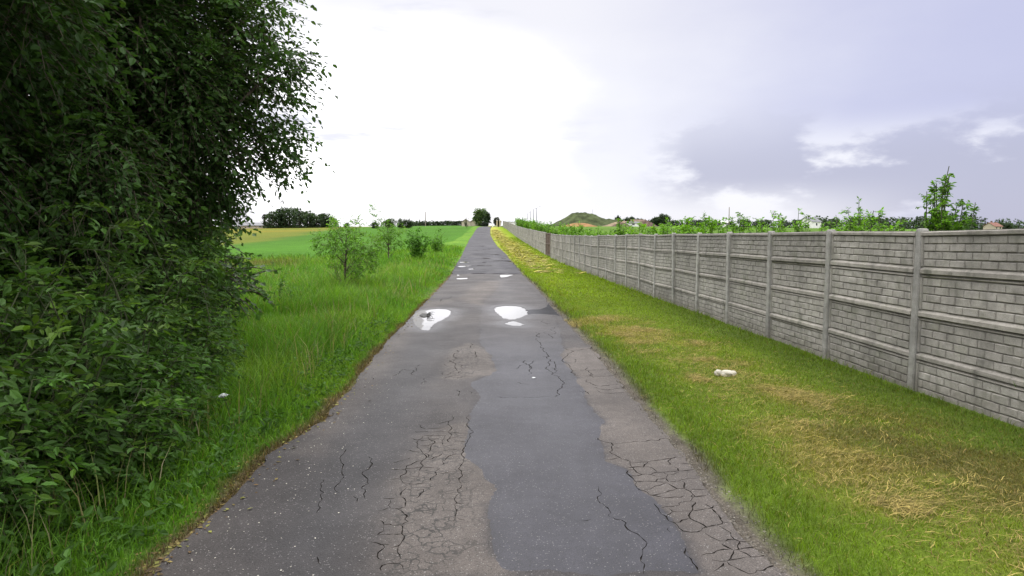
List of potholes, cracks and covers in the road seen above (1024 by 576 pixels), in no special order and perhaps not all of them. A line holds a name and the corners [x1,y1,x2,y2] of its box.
crack [398,346,477,397]
crack [586,487,647,574]
crack [501,321,625,398]
crack [316,416,472,571]
crack [597,438,773,574]
